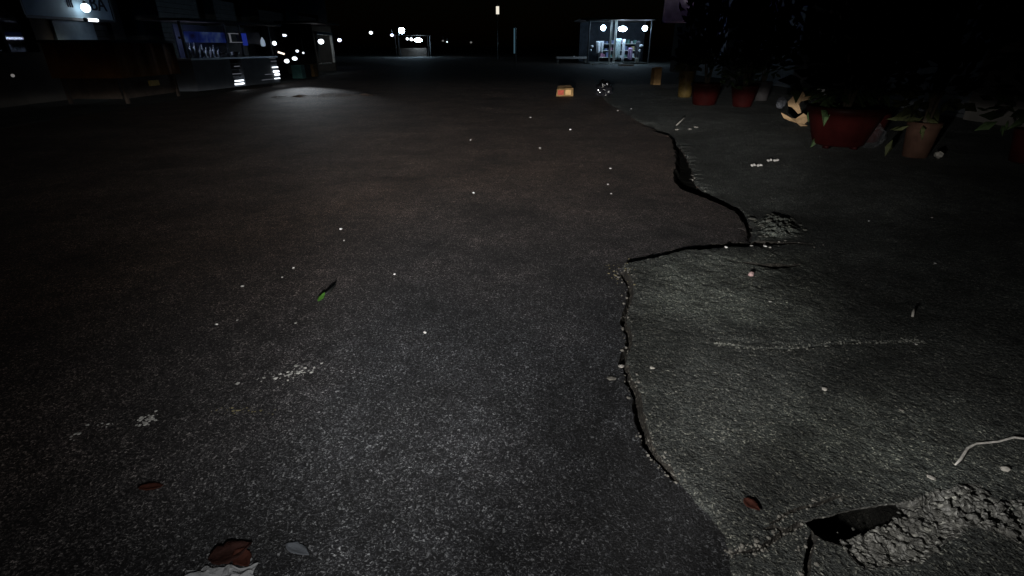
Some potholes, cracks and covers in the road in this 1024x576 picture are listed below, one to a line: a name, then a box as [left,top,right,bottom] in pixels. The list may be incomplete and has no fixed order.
pothole [796,484,1024,570]
crack [614,137,824,484]
crack [713,337,927,351]
